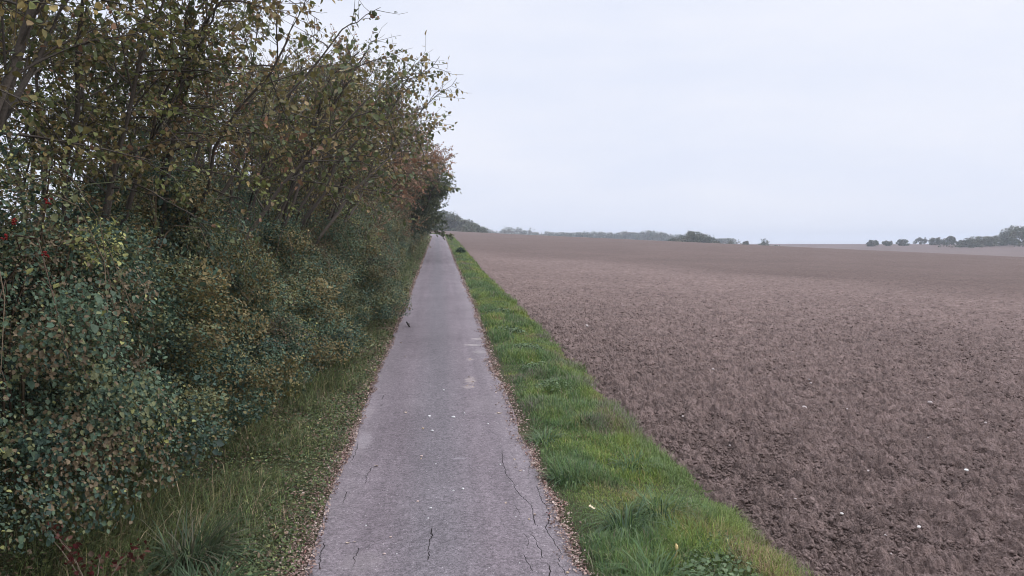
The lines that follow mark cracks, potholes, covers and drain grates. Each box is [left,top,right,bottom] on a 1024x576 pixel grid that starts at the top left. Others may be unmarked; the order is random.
crack [502,452,568,576]
